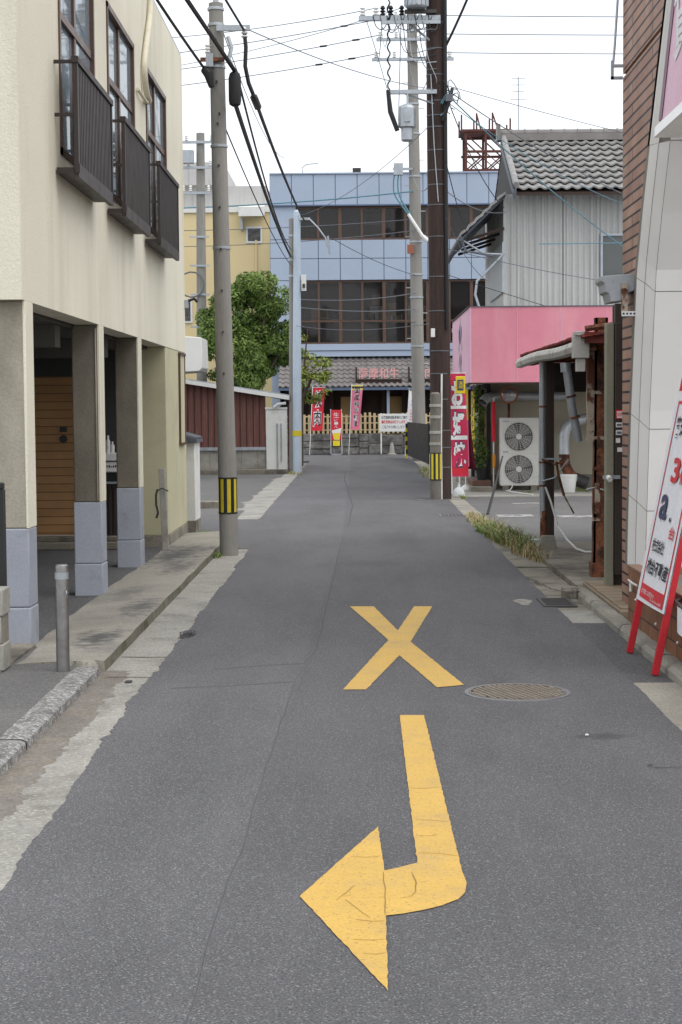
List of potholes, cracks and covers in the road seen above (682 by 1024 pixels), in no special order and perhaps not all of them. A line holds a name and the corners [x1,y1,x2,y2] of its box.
drain grate [536,598,578,608]
manhole cover [464,683,571,702]
